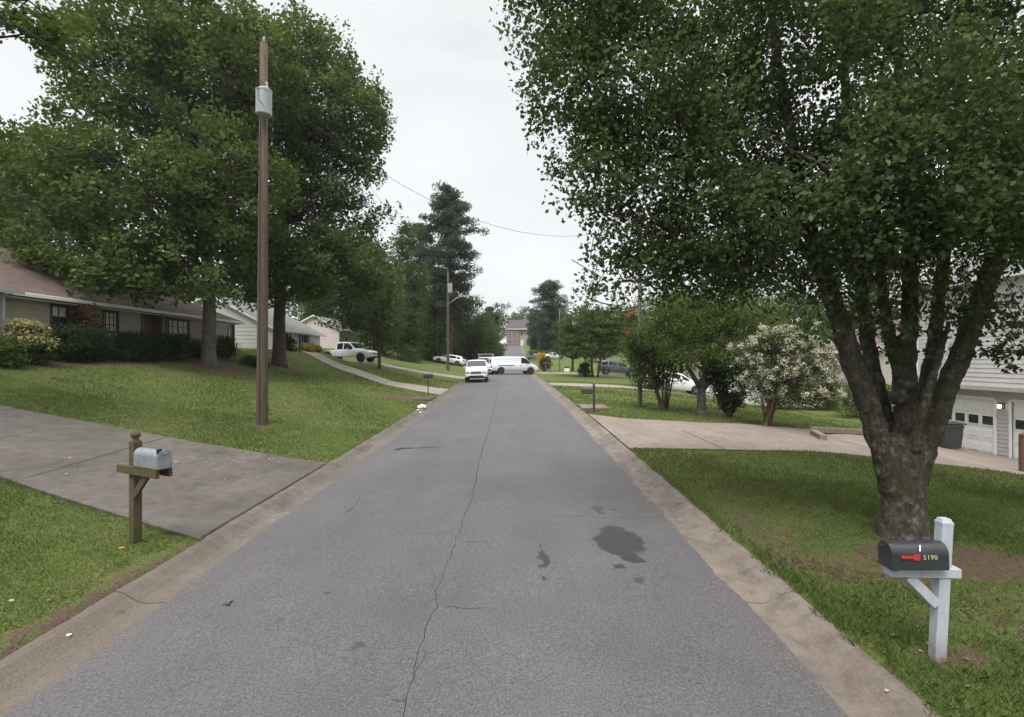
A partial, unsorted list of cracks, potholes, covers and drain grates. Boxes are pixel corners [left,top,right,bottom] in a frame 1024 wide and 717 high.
crack [393,384,499,716]
